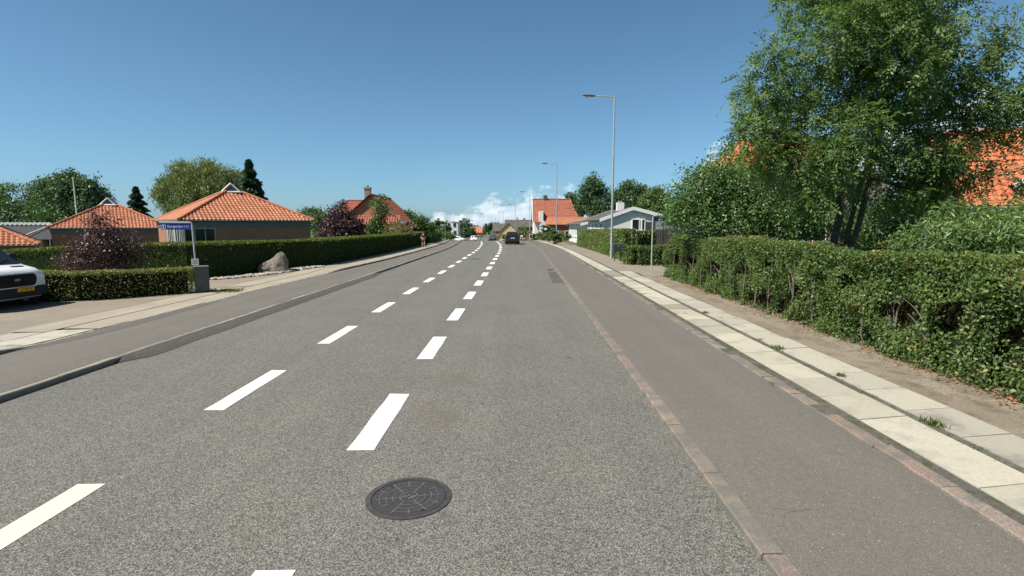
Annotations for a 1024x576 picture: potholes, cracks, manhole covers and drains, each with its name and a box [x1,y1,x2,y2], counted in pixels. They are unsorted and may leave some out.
manhole cover [365,477,452,520]
